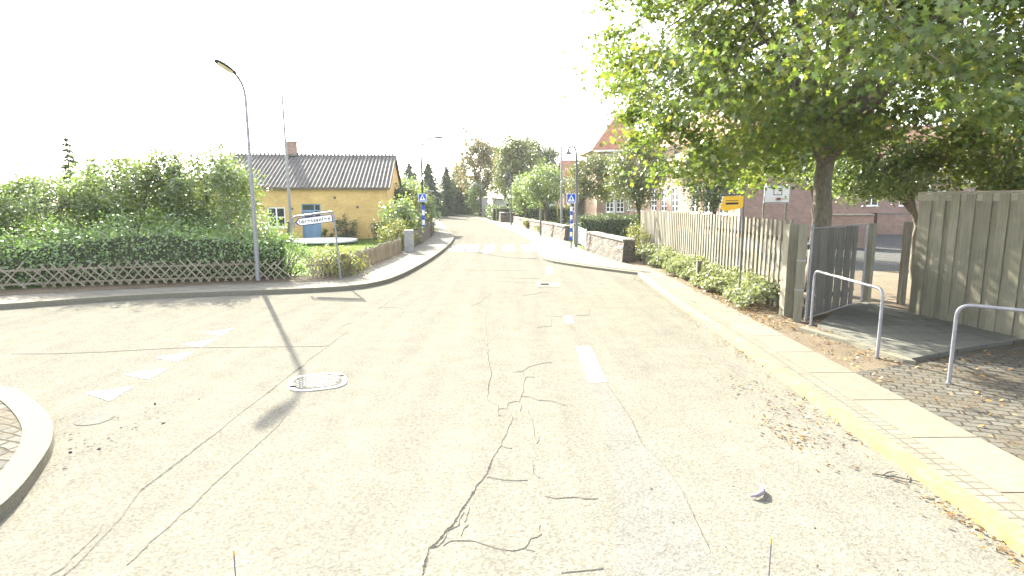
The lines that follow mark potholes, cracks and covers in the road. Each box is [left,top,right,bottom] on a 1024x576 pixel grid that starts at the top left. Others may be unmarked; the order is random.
crack [422,277,566,574]
manhole cover [287,372,348,392]
crack [51,301,405,575]
